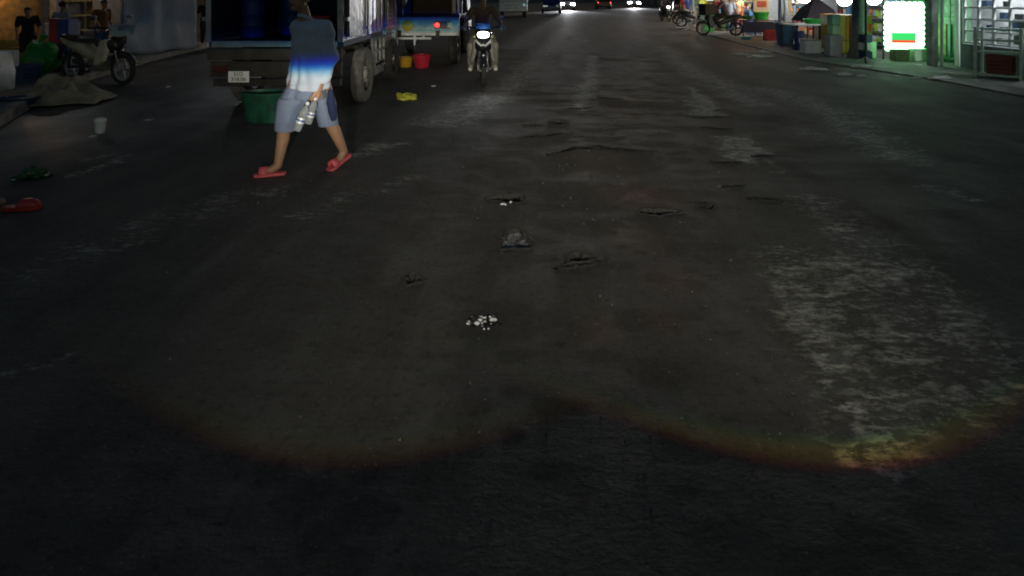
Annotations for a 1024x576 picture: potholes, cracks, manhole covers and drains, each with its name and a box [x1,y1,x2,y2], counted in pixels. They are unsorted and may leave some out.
crack [517,124,653,156]
pothole [484,193,528,204]
pothole [400,271,428,287]
pothole [636,208,685,217]
pothole [495,228,536,251]
pothole [563,250,598,266]
